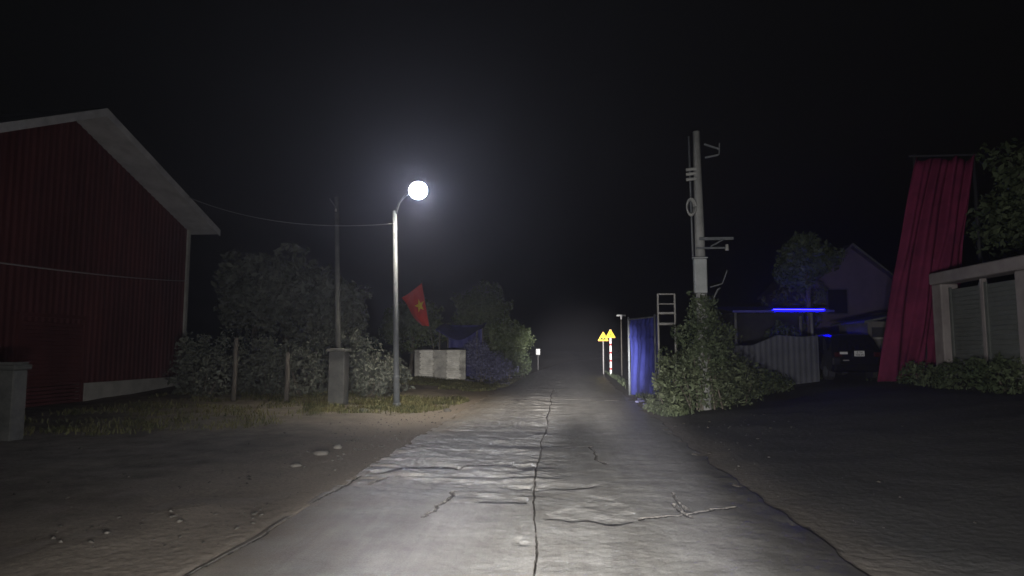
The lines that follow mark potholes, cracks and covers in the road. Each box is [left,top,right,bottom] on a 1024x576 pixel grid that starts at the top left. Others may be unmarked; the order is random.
crack [638,492,737,521]
crack [364,388,616,576]
